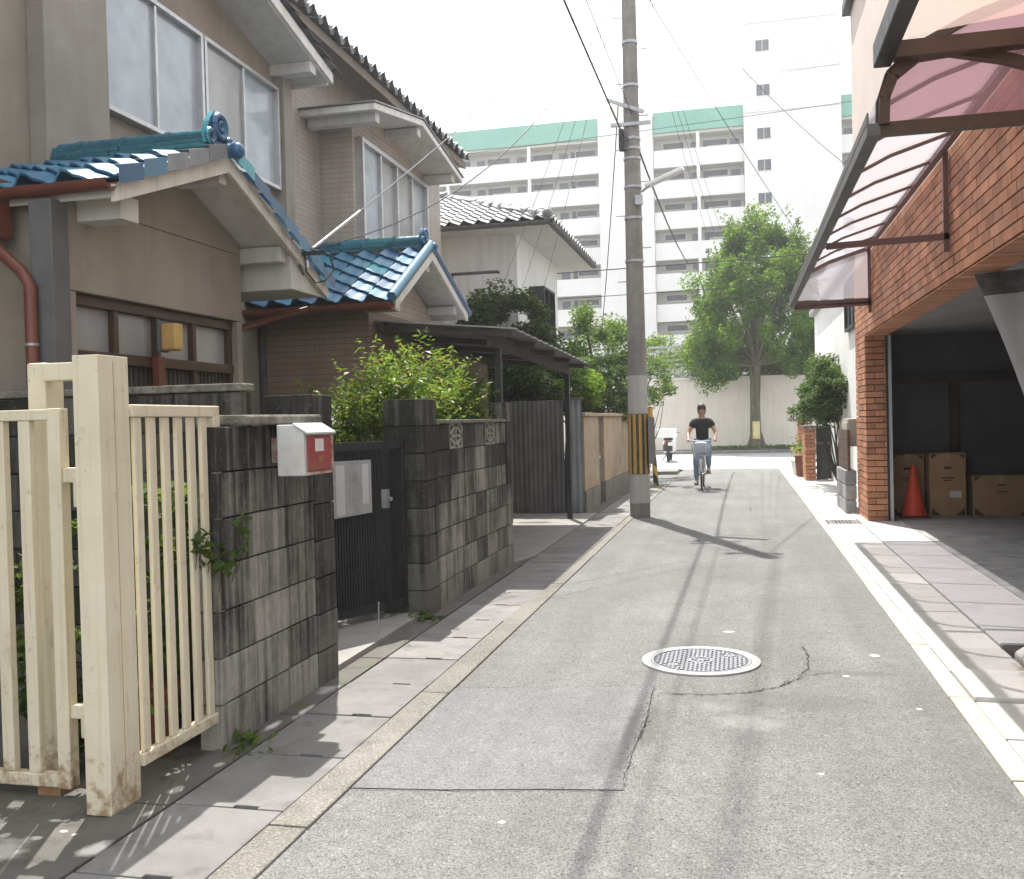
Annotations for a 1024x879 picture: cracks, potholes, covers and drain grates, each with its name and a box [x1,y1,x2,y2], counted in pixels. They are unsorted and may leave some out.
crack [354,645,838,791]
manhole cover [642,646,761,677]
